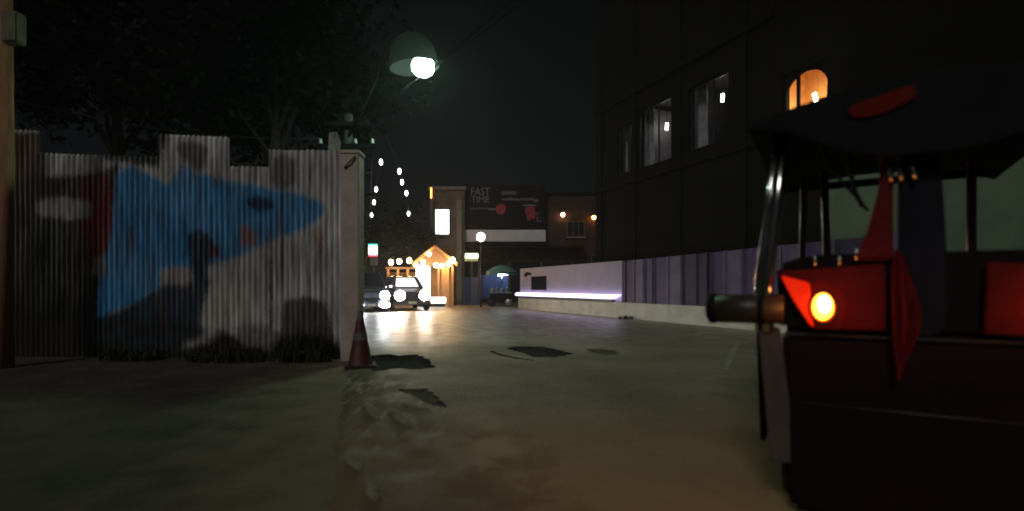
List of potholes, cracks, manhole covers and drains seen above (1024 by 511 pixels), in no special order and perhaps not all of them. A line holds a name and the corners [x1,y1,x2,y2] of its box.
pothole [508,346,573,357]
pothole [366,354,436,372]
crack [490,351,534,361]
pothole [399,388,447,408]
